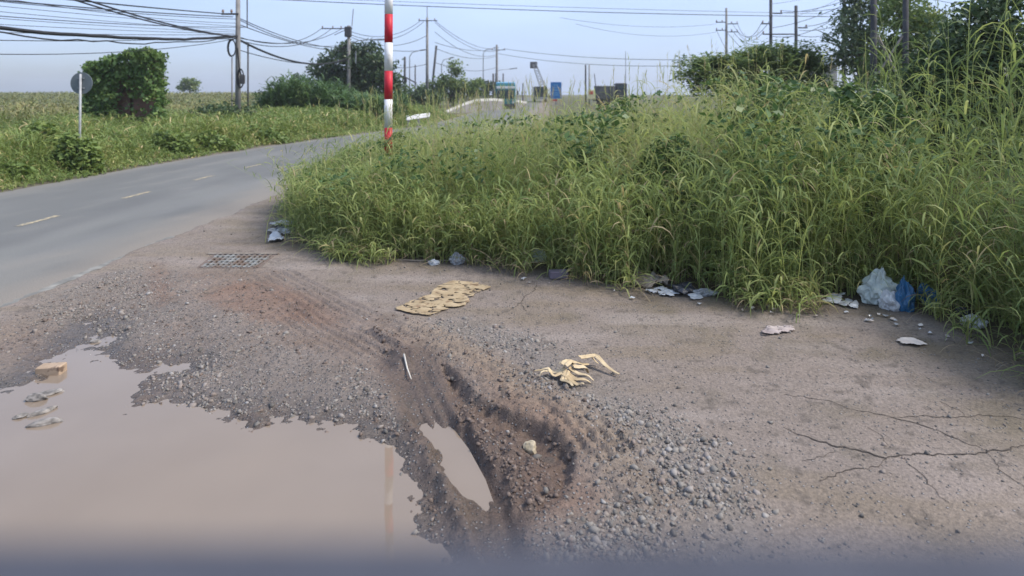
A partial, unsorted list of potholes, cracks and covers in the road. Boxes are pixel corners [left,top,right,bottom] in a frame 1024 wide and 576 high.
drain grate [197,253,279,268]
pothole [0,315,477,543]
crack [784,394,1024,503]
